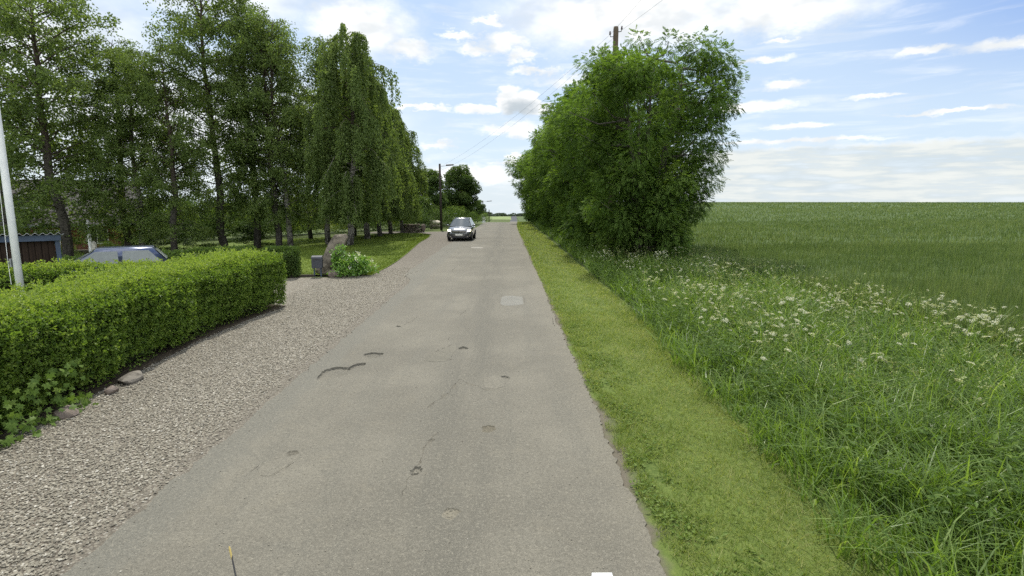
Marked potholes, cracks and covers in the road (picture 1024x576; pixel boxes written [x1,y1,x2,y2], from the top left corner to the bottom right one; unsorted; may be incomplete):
crack [402,432,438,495]
crack [427,379,489,408]
